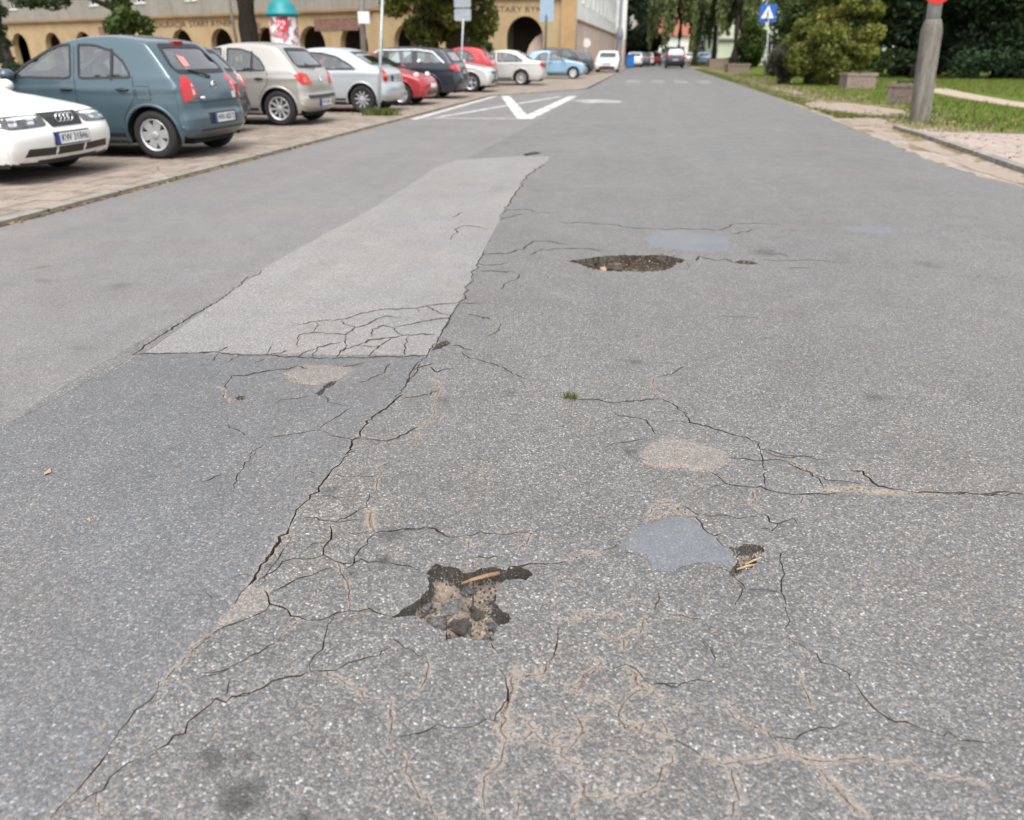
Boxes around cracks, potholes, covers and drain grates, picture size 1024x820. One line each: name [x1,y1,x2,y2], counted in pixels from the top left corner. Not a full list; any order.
crack [133,270,262,355]
pothole [570,255,685,272]
pothole [392,563,532,642]
pothole [729,543,764,578]
crack [65,552,999,820]
crack [204,209,845,597]
crack [389,367,1024,588]
